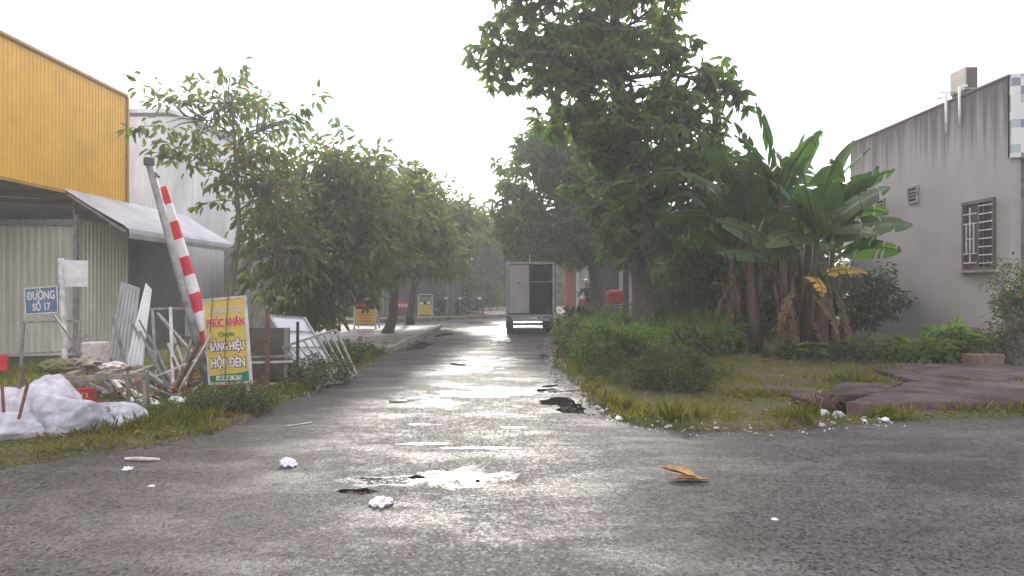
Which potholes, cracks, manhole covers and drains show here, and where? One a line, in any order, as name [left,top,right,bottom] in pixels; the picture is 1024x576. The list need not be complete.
pothole [540,397,586,414]
